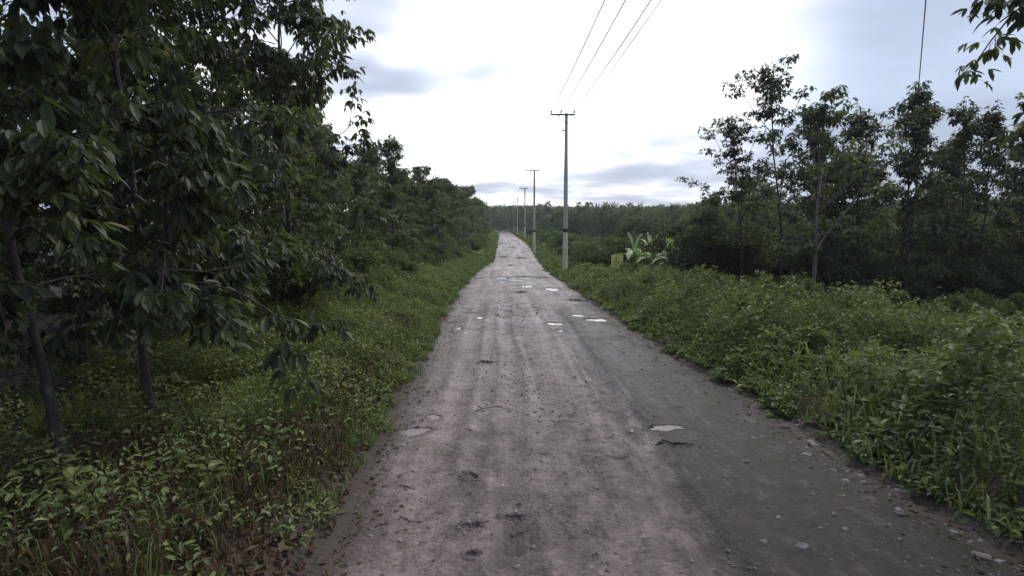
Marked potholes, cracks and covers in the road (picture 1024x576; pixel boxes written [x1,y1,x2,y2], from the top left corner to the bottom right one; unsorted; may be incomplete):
pothole [397,426,438,438]
pothole [425,413,444,422]
crack [460,303,541,321]
pothole [495,512,527,524]
pothole [457,470,483,483]
pothole [460,548,483,561]
pothole [455,518,489,536]
pothole [641,423,693,432]
pothole [654,439,695,448]
